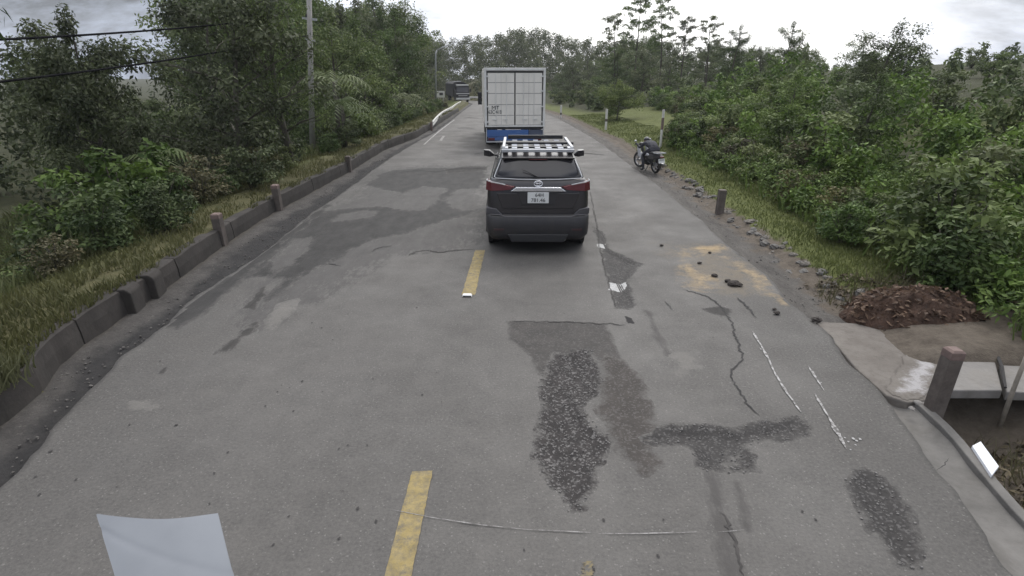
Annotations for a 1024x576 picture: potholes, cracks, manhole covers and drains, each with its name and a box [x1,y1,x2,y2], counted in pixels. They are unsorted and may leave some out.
pothole [638,415,815,474]
pothole [529,349,612,514]
crack [720,512,744,576]
pothole [843,467,928,570]
crack [665,290,759,415]
